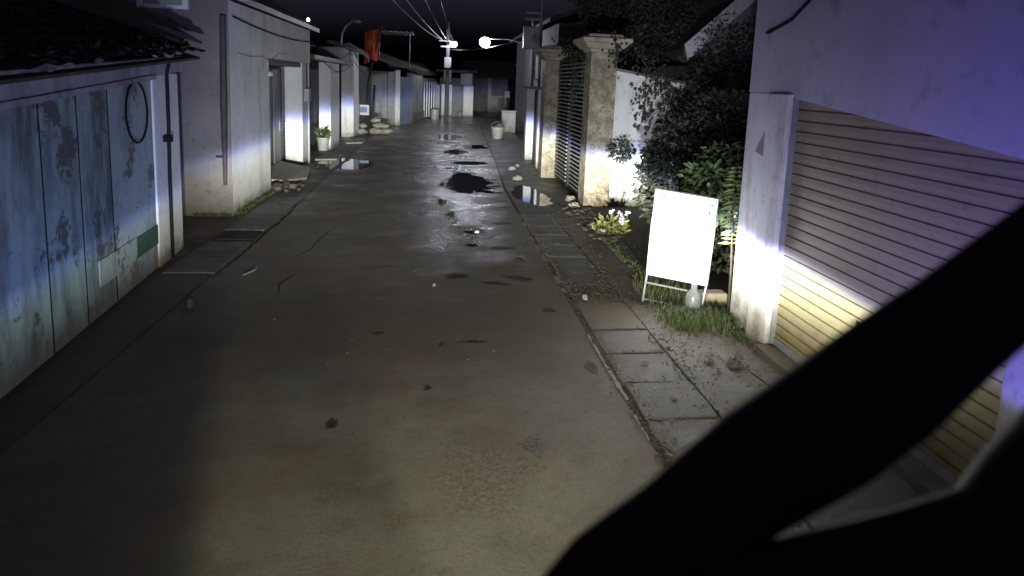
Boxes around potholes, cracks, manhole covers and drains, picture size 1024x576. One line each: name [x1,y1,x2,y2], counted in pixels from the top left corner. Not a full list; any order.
crack [211,191,336,294]
pothole [324,417,339,429]
pothole [437,171,496,195]
